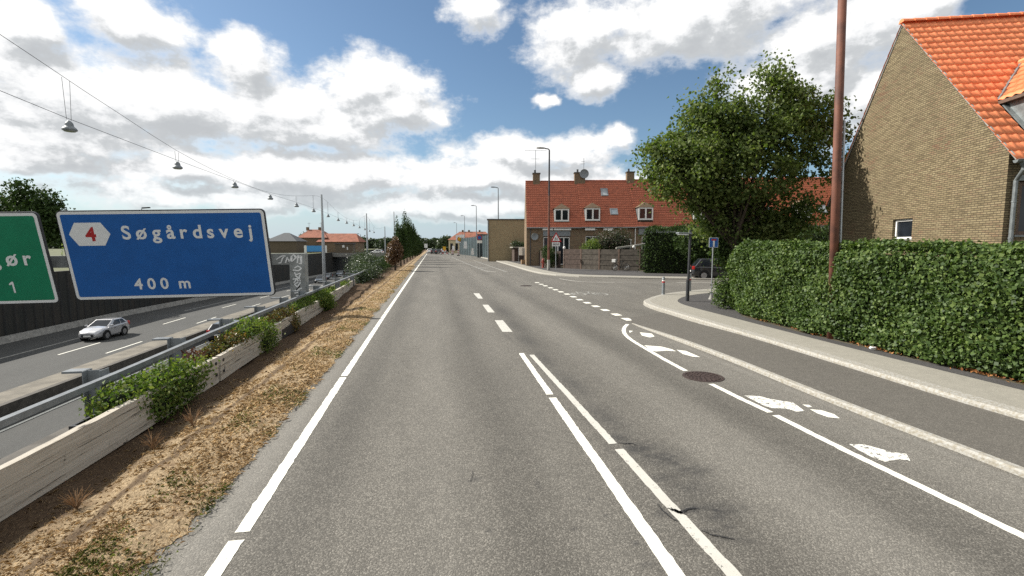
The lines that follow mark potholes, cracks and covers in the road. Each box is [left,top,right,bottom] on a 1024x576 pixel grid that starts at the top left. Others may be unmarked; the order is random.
manhole cover [682,371,724,382]
crack [658,505,734,539]
